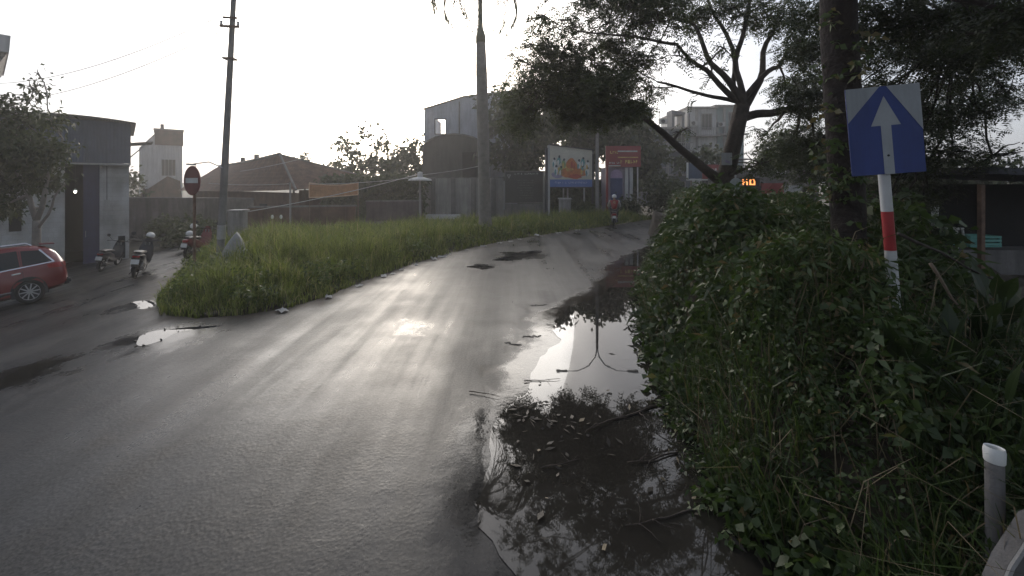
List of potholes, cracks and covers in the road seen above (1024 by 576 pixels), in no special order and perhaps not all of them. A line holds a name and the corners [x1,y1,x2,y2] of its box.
pothole [493,250,542,261]
pothole [134,325,224,347]
